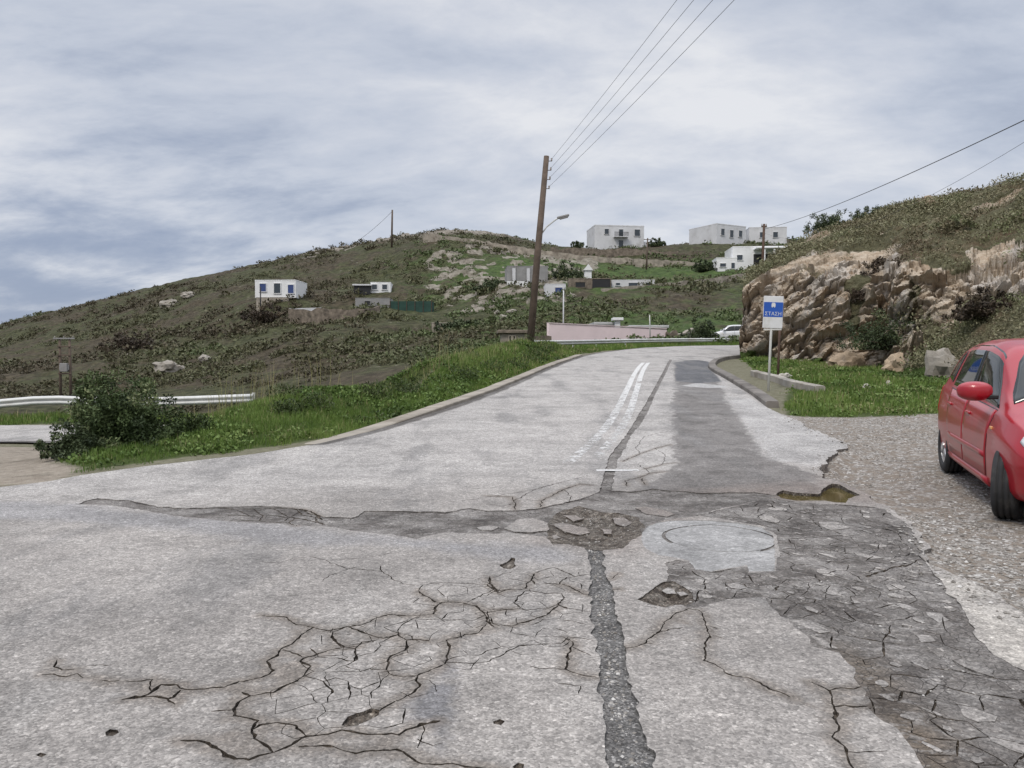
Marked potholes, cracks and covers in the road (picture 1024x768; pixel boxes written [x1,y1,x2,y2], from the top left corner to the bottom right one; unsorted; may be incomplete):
manhole cover [641,520,775,571]
pothole [637,581,695,607]
crack [624,432,671,486]
crack [272,553,418,586]
crack [628,500,1024,768]
pothole [546,506,645,551]
crack [42,565,594,768]
pothole [776,484,859,497]
